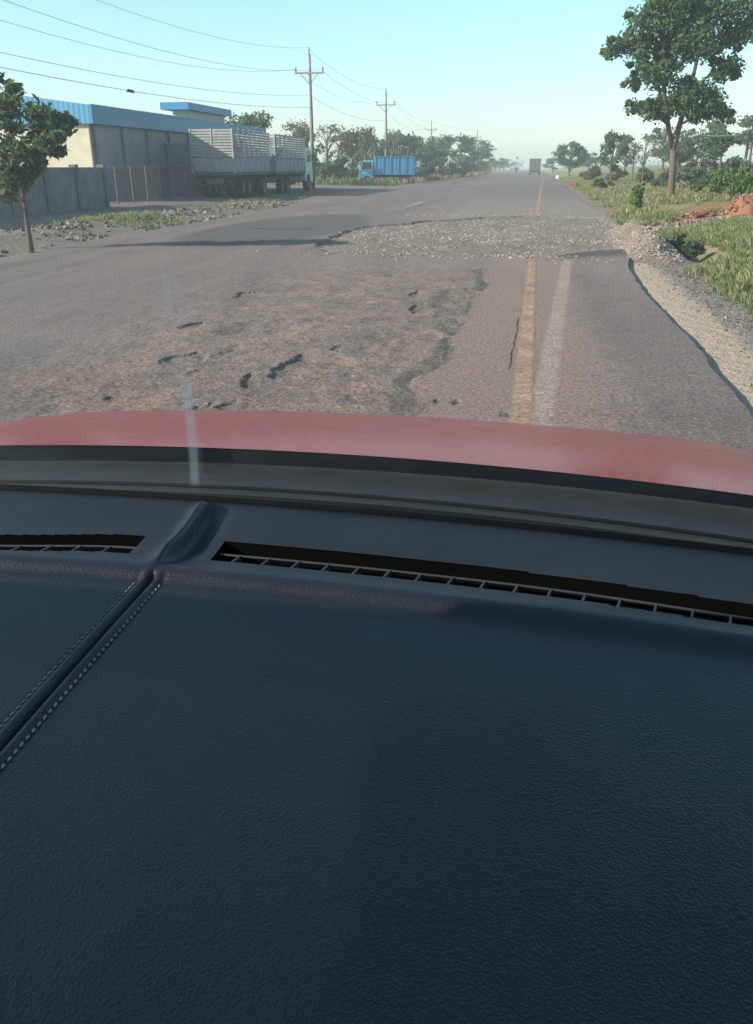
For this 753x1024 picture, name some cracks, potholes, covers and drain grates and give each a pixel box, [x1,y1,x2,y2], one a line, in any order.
pothole [175,321,205,330]
pothole [266,353,313,380]
pothole [239,373,263,389]
pothole [408,303,429,314]
pothole [157,351,209,366]
